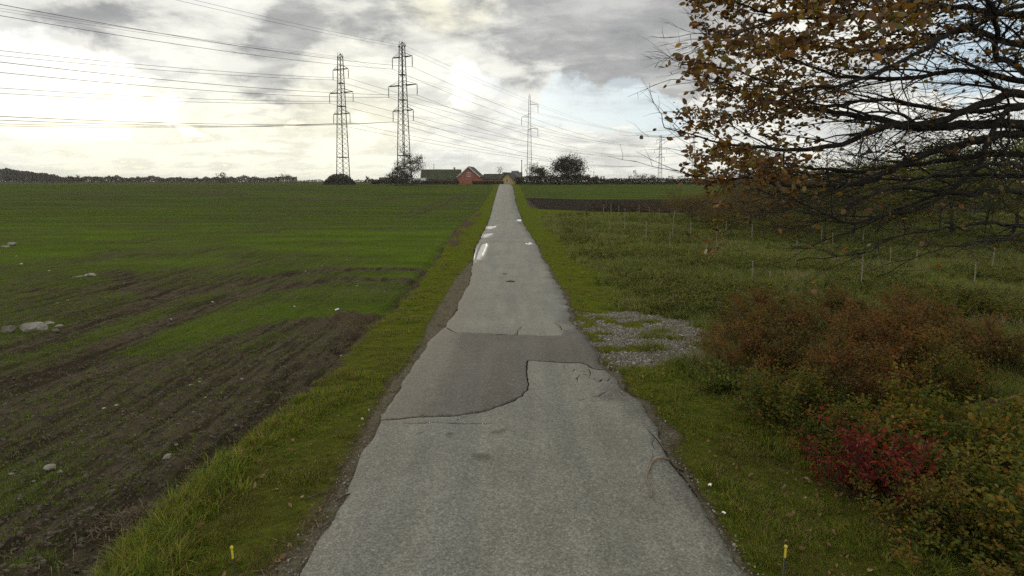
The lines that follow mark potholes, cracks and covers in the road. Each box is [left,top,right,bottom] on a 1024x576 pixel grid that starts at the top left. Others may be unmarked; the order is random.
crack [648,430,698,499]
